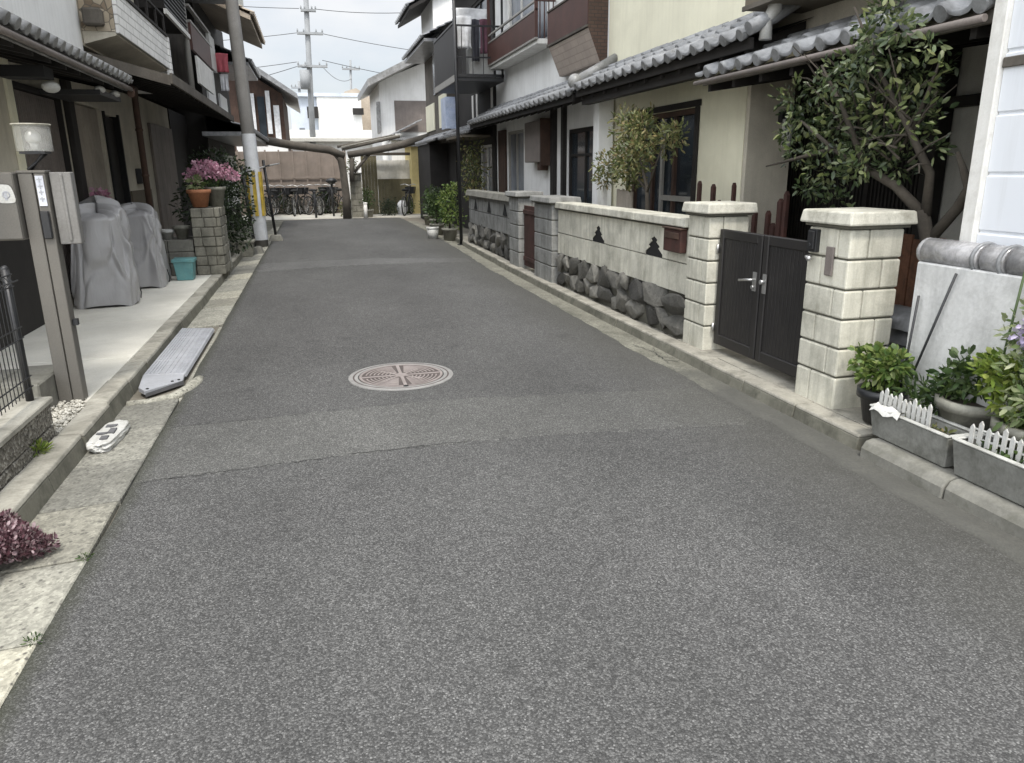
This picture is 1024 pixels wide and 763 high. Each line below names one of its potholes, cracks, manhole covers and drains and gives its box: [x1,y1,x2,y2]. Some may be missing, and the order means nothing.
manhole cover [348,362,453,391]
